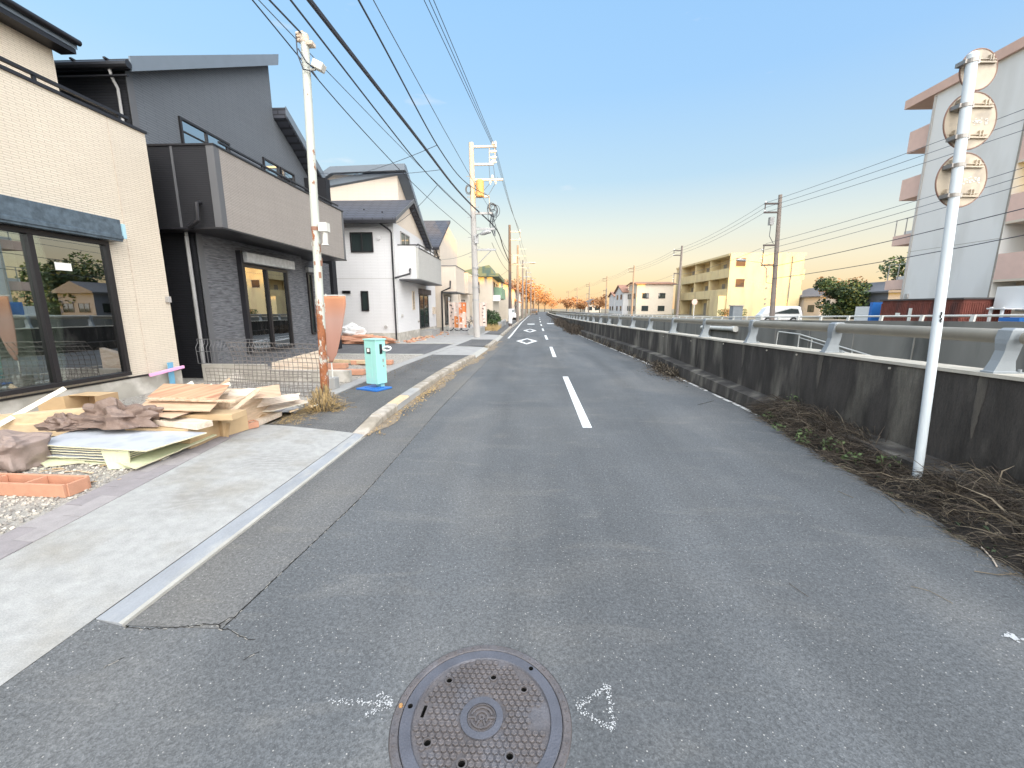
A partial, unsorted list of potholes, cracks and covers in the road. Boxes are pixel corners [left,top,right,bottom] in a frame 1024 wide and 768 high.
crack [124,350,498,660]
manhole cover [388,645,572,768]
